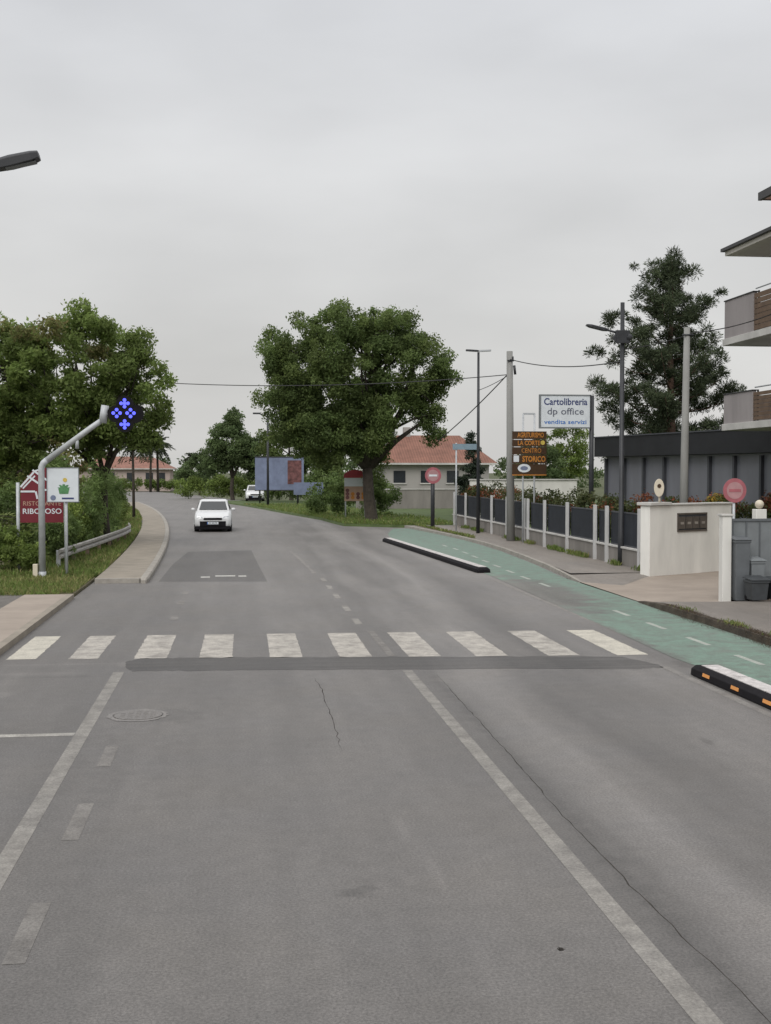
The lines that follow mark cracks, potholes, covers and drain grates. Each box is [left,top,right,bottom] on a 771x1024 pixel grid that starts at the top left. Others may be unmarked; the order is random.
manhole cover [106,709,170,722]
